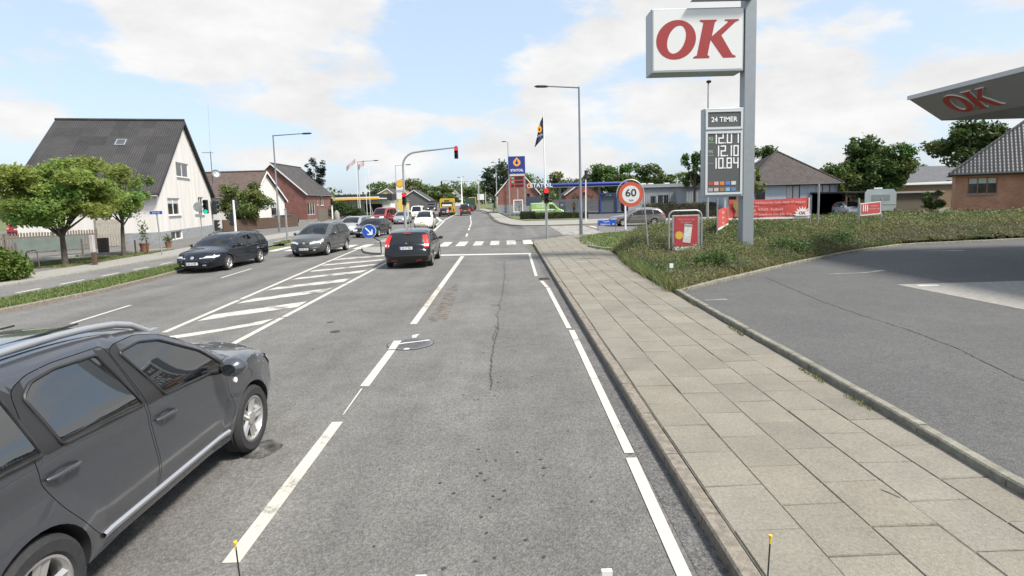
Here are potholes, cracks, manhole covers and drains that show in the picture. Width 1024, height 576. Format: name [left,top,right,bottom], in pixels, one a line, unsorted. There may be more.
manhole cover [387,334,434,350]
crack [490,263,516,390]
